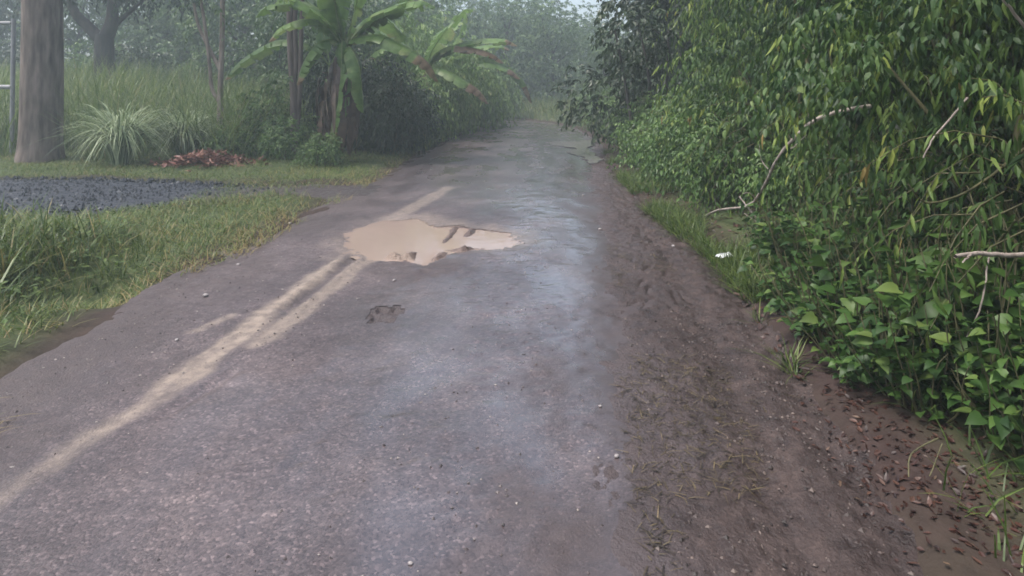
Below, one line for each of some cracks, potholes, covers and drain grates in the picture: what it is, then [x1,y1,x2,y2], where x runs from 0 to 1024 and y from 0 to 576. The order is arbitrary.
pothole [365,305,405,323]
pothole [342,219,524,266]
